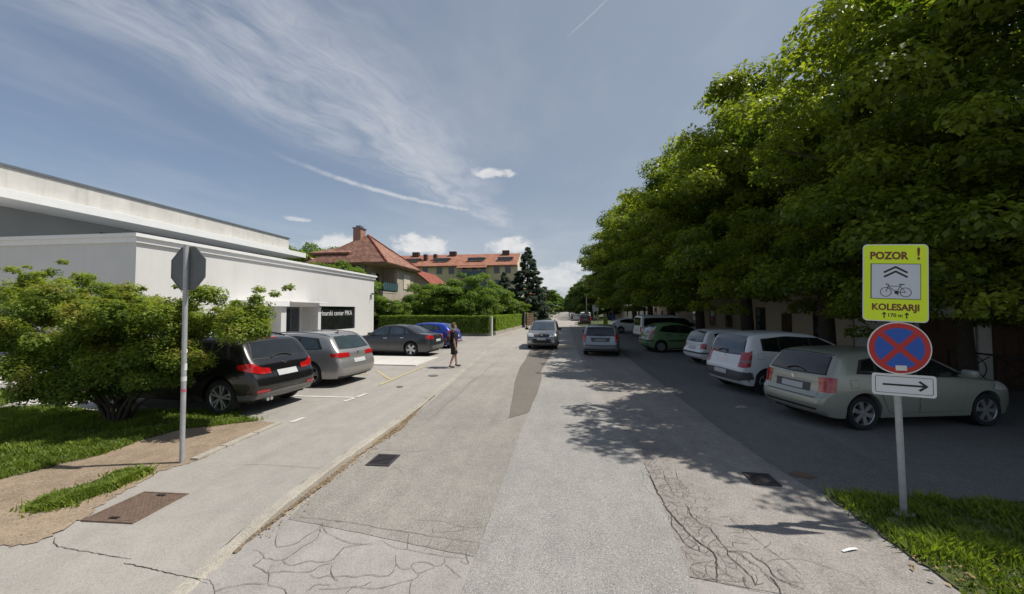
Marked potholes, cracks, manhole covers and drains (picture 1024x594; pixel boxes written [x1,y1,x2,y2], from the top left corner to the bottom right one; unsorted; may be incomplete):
utility cover [790,471,815,479]
crack [214,524,470,594]
crack [634,438,858,594]
drain grate [365,454,400,467]
manhole cover [81,491,190,524]
drain grate [742,472,782,487]
